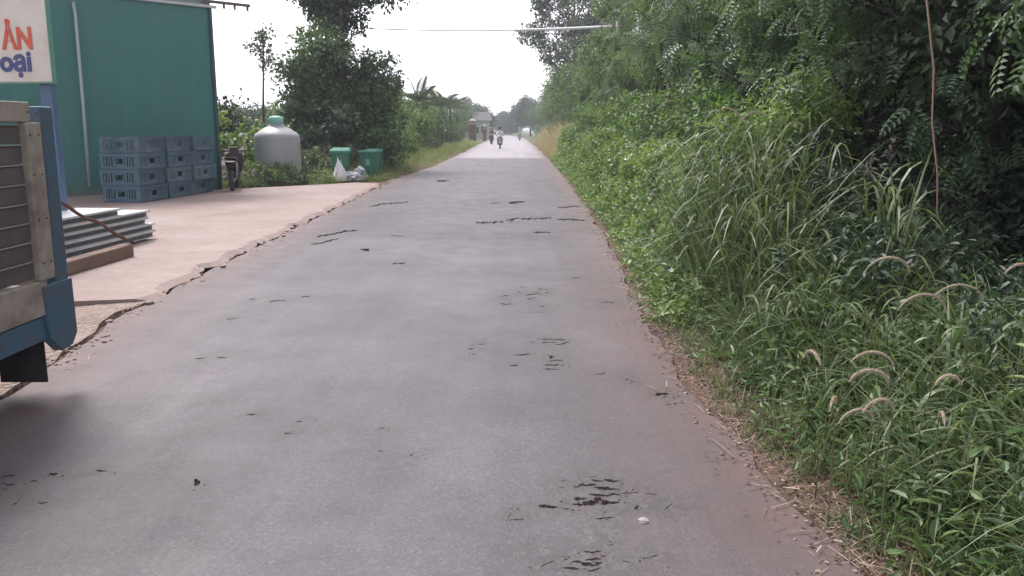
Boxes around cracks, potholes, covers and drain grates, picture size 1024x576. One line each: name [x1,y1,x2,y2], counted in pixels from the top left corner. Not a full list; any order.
crack [559,476,673,520]
crack [541,544,657,572]
crack [475,202,585,233]
crack [509,338,569,370]
crack [0,475,37,505]
crack [310,230,357,245]
